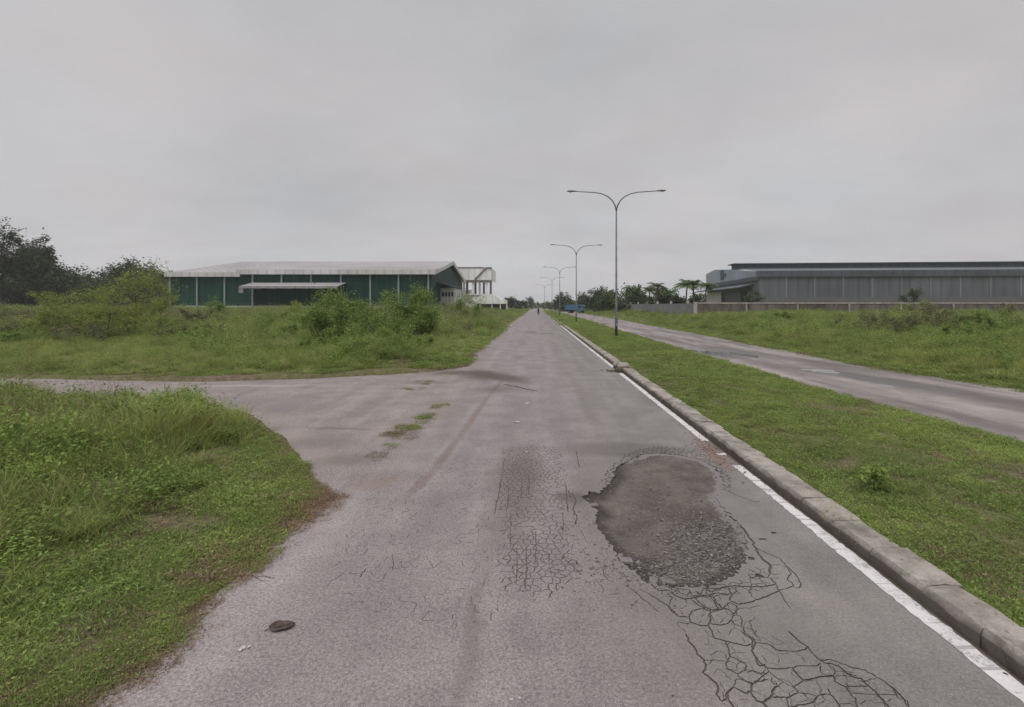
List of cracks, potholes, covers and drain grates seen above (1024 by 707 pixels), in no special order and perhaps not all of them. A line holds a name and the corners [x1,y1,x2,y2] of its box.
crack [598,446,910,707]
crack [494,445,652,630]
pothole [581,452,749,588]
